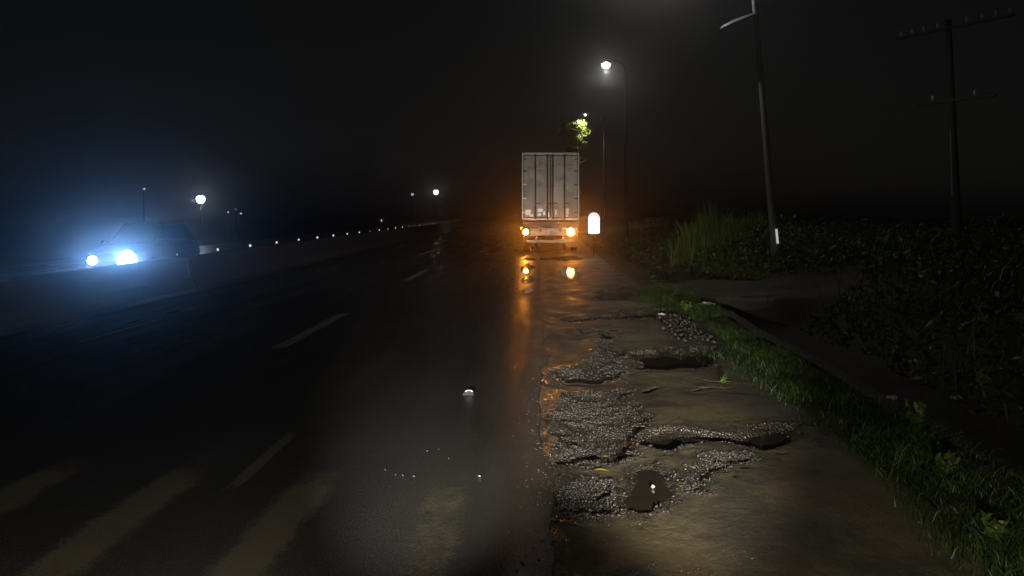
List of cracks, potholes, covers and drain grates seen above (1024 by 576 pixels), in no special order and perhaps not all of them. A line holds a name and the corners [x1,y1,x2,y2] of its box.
pothole [540,385,666,473]
pothole [634,417,827,456]
pothole [541,326,637,386]
pothole [548,471,625,532]
pothole [625,341,736,373]
